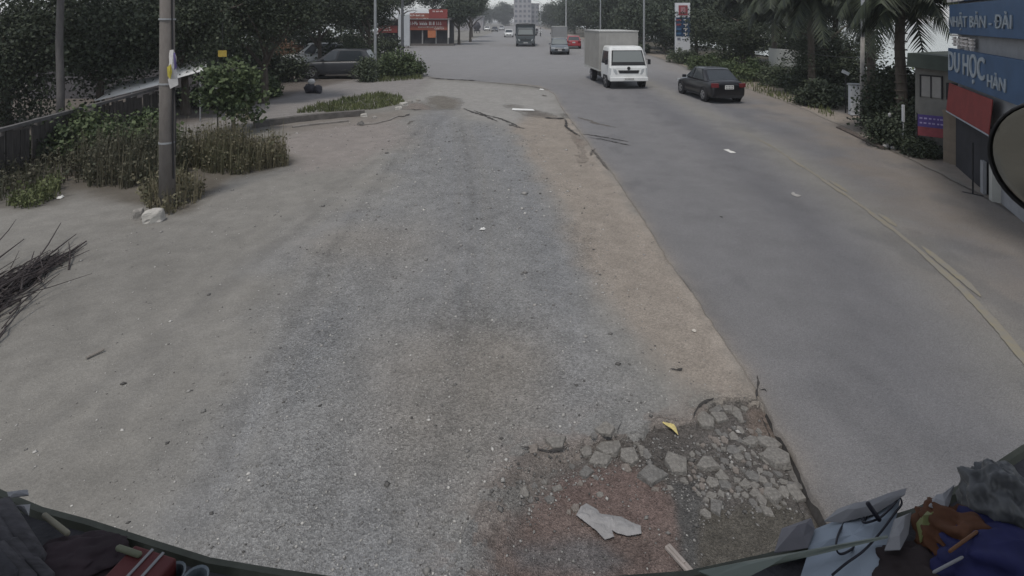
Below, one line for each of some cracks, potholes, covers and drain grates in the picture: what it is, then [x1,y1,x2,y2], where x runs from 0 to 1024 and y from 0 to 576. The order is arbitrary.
crack [544,117,628,170]
pothole [454,397,819,576]
